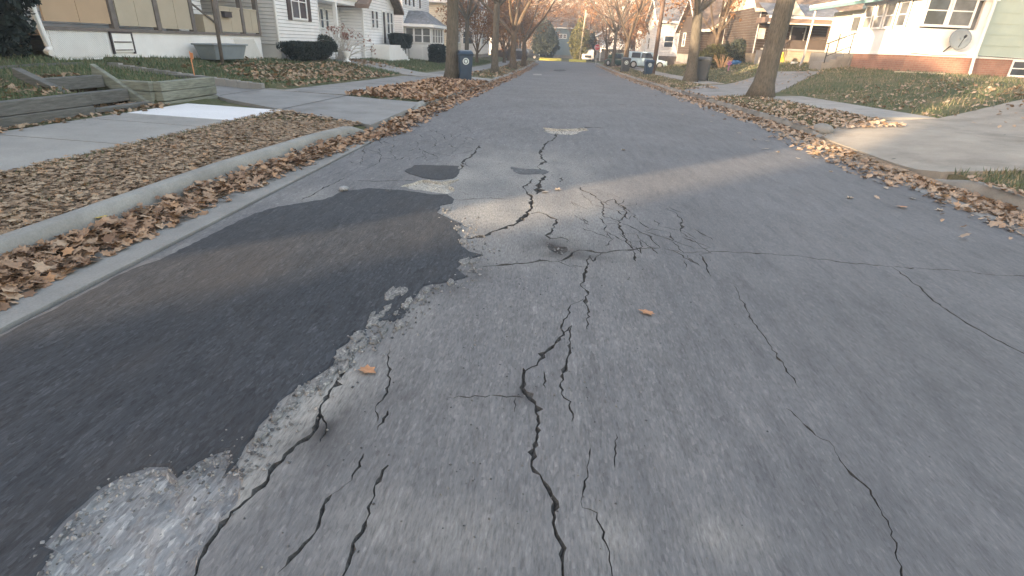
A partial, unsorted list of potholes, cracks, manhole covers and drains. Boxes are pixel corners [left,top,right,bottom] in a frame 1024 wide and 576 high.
crack [448,134,1024,576]
pothole [547,242,568,255]
crack [375,352,392,430]
crack [194,372,388,576]
